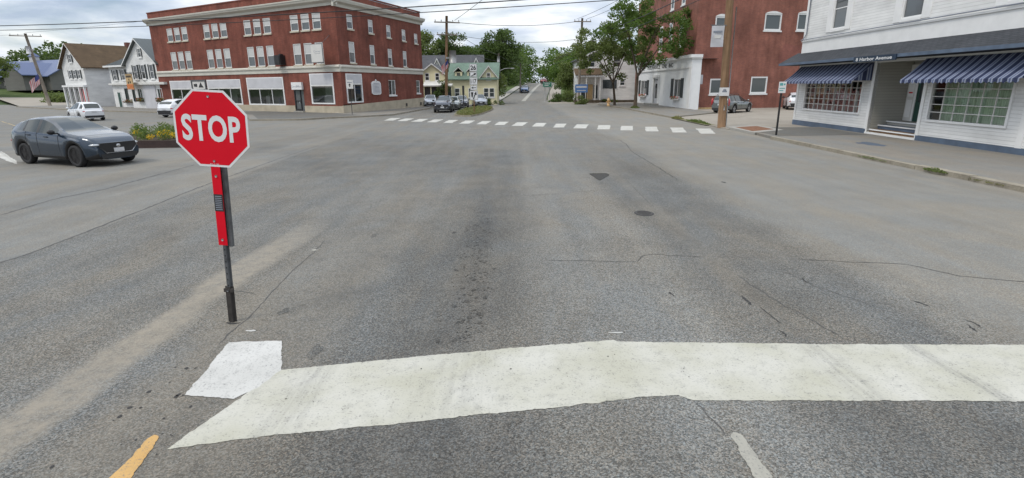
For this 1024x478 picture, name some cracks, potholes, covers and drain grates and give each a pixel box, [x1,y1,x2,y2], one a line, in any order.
crack [545,254,770,262]
crack [738,275,839,337]
crack [788,259,1024,306]
